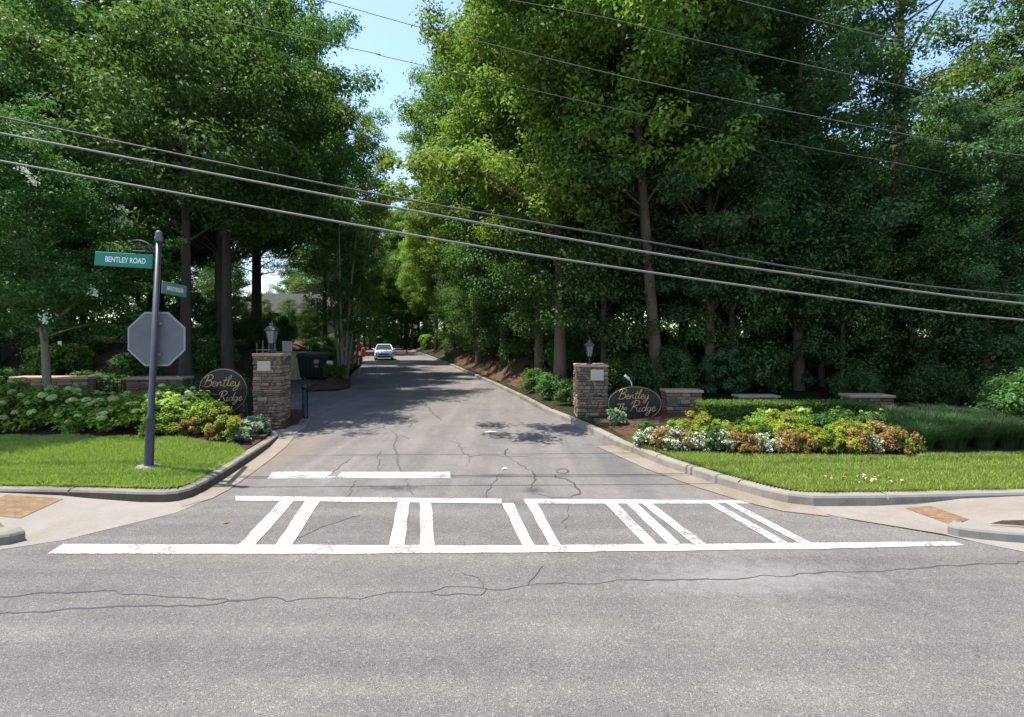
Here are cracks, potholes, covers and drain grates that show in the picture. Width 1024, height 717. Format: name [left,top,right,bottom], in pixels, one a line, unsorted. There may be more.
crack [356,400,441,495]
crack [0,561,1024,614]
crack [452,441,581,529]
